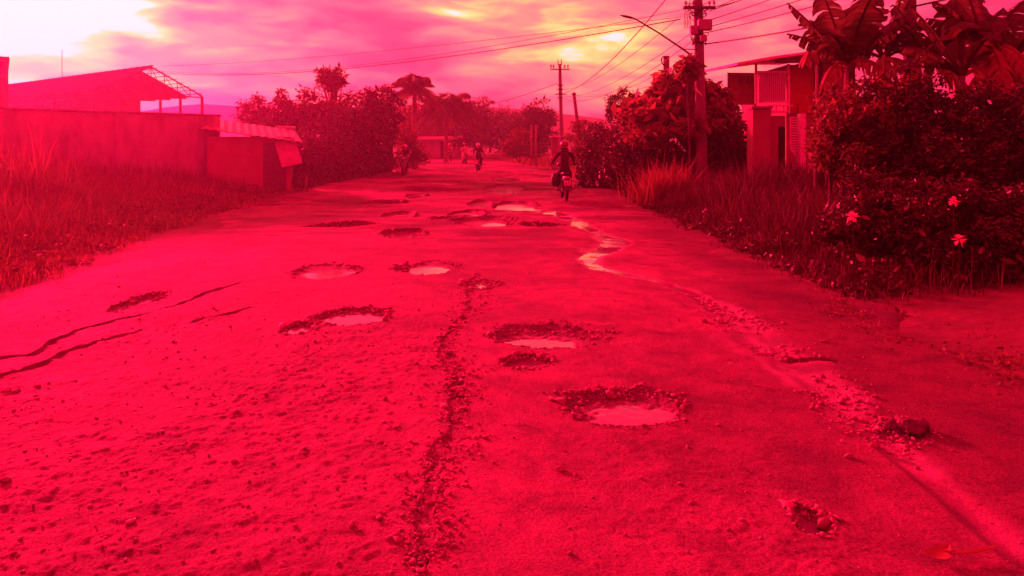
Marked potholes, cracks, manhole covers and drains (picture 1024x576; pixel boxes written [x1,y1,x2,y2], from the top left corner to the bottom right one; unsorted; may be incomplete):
pothole [561,387,683,427]
pothole [793,507,836,535]
pothole [381,230,425,239]
pothole [279,323,314,336]
crack [412,273,487,568]
pothole [289,264,362,281]
pothole [493,201,536,212]
crack [0,282,256,379]
pothole [490,323,604,349]
pothole [448,210,484,218]
pothole [392,260,461,275]
